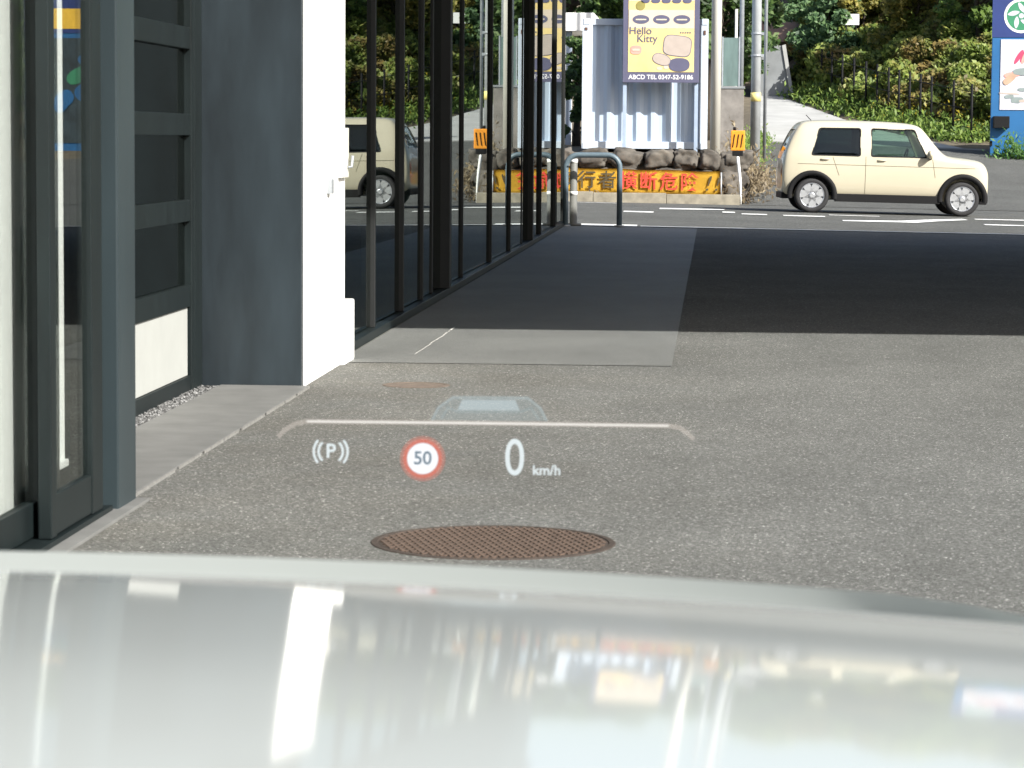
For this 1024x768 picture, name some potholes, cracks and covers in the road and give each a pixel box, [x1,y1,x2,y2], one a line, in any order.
manhole cover [371,525,616,560]
